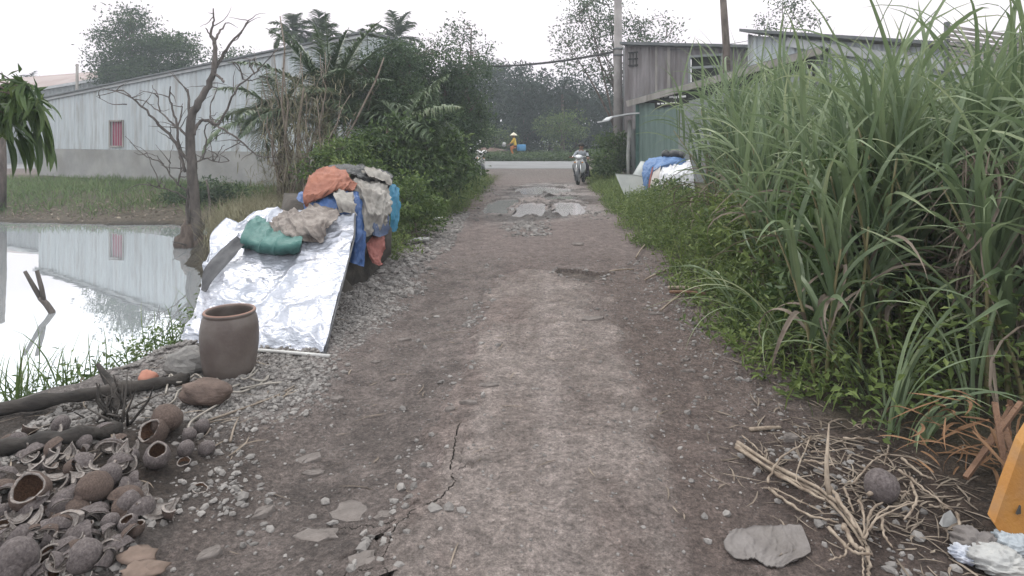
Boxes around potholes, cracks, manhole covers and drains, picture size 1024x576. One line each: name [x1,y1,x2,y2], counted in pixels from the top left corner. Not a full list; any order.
pothole [548,268,615,282]
crack [332,422,472,576]
